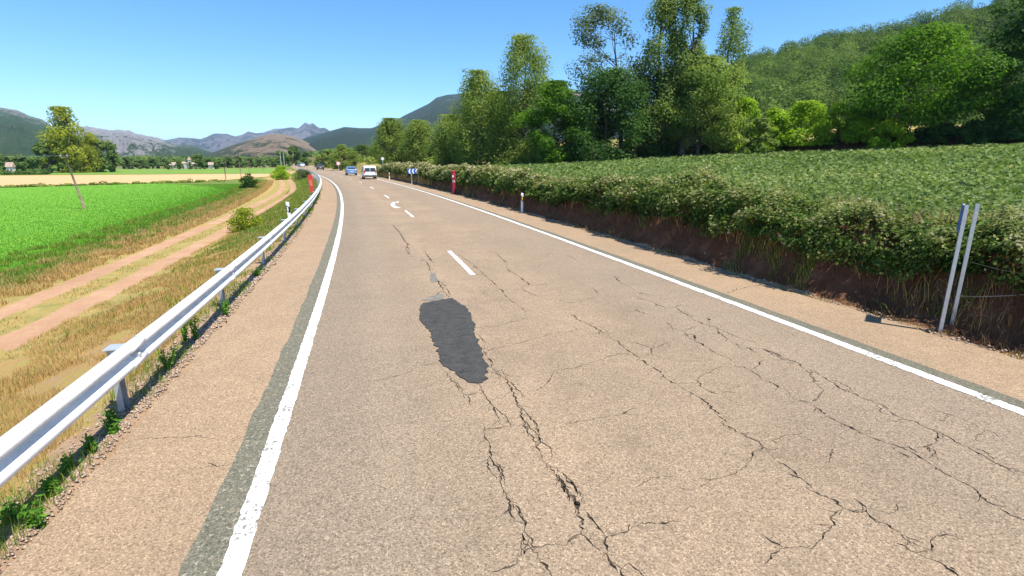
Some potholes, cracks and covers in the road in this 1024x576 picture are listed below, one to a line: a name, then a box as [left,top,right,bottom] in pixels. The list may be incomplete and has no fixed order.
crack [377,251,806,576]
crack [391,224,451,297]
crack [613,275,1024,521]
crack [765,462,964,576]
